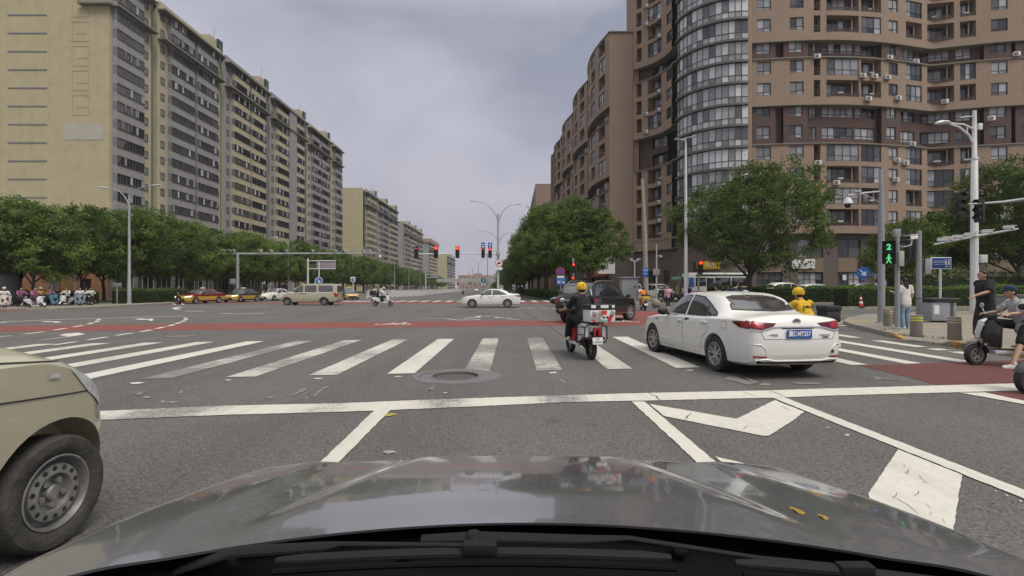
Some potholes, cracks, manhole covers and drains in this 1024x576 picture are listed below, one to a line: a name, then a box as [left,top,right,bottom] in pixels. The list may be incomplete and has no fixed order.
manhole cover [412,369,502,384]
